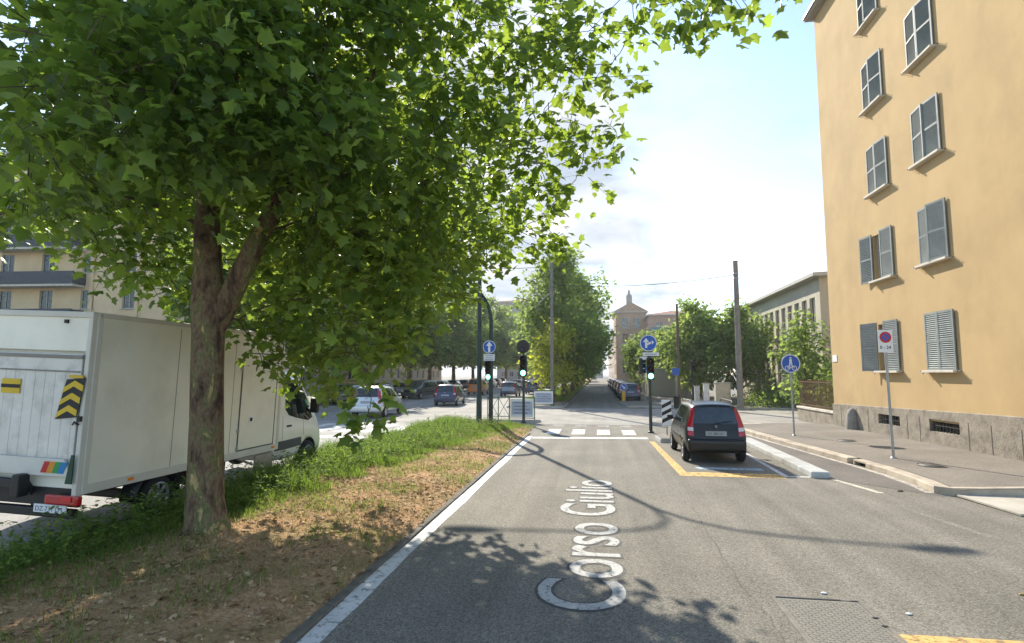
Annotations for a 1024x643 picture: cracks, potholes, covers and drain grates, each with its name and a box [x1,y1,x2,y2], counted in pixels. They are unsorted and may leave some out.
manhole cover [770,595,908,643]
drain grate [853,459,876,468]
